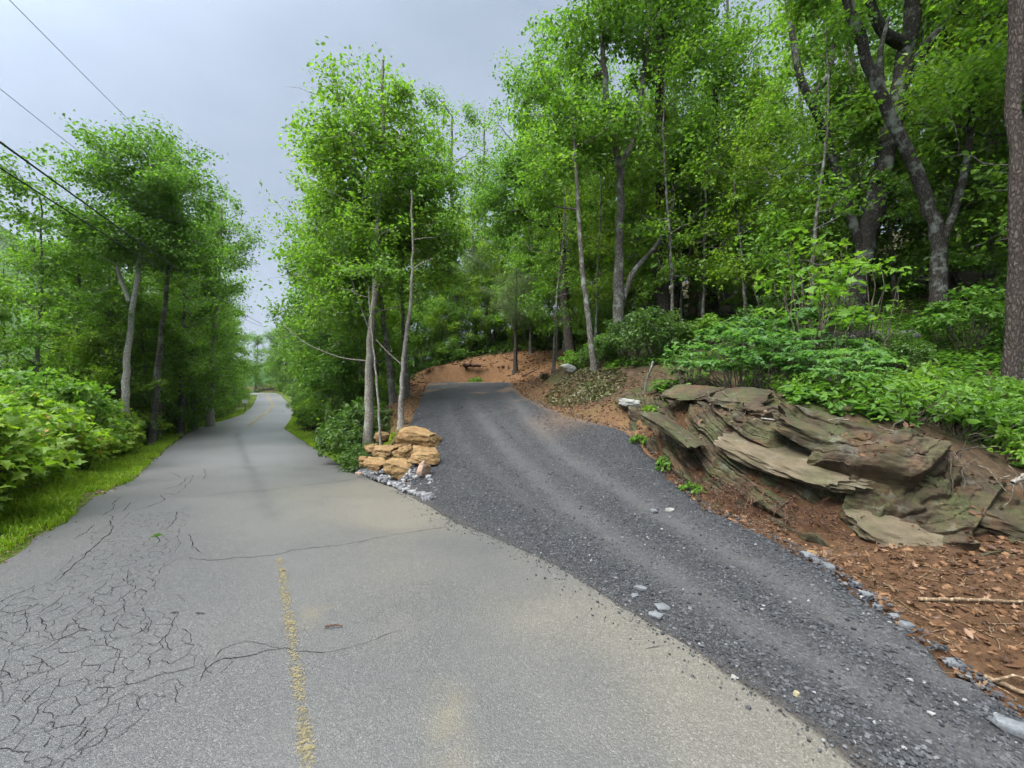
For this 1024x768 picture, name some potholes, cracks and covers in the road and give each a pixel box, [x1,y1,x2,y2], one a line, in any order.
crack [58,469,344,580]
crack [201,629,402,677]
crack [0,512,202,768]
